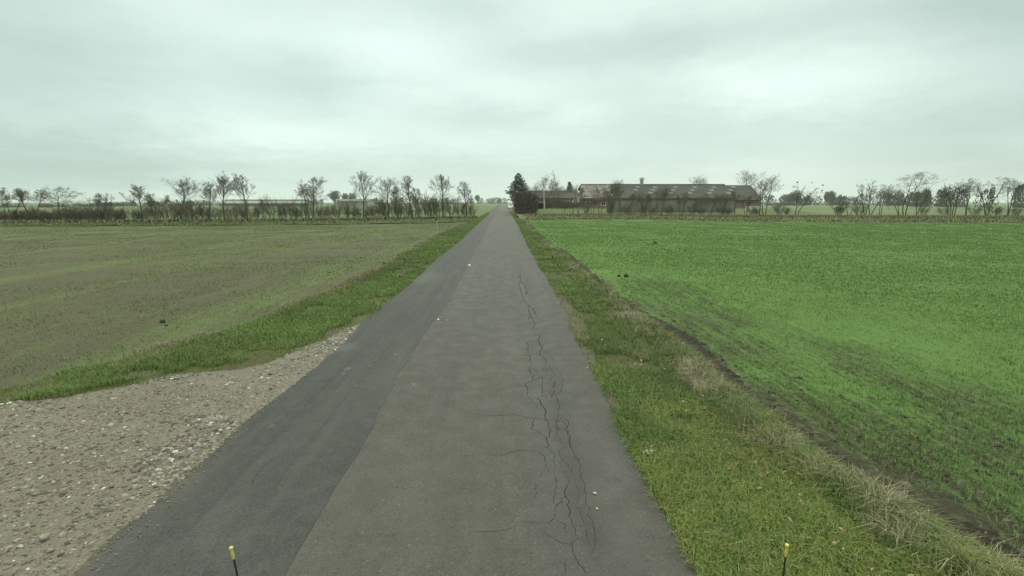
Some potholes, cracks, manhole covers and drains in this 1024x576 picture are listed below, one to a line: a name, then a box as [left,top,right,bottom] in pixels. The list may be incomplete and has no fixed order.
crack [467,266,620,574]
